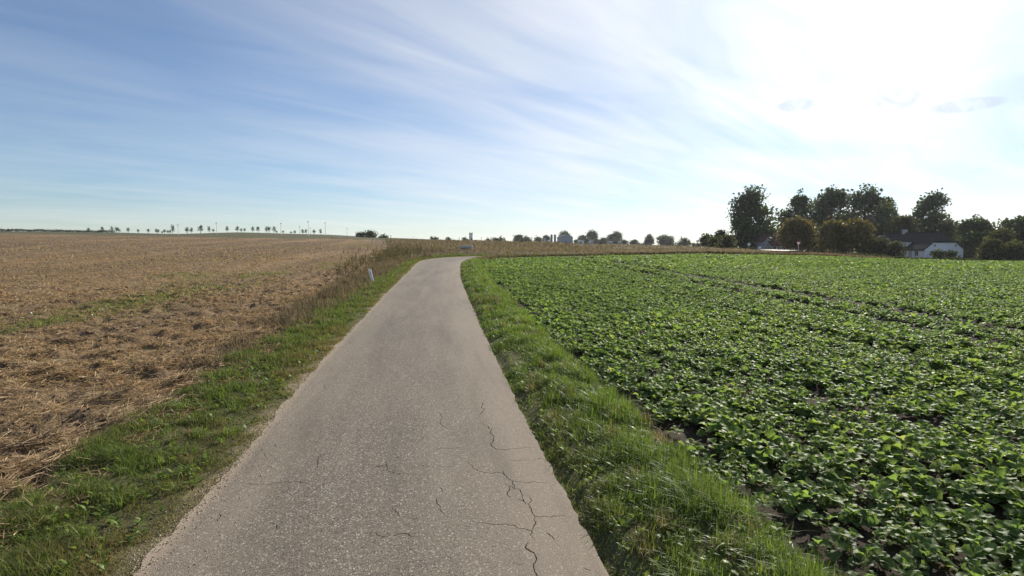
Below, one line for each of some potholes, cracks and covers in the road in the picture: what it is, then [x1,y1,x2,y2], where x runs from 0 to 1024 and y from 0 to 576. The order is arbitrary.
crack [471,465,562,576]
